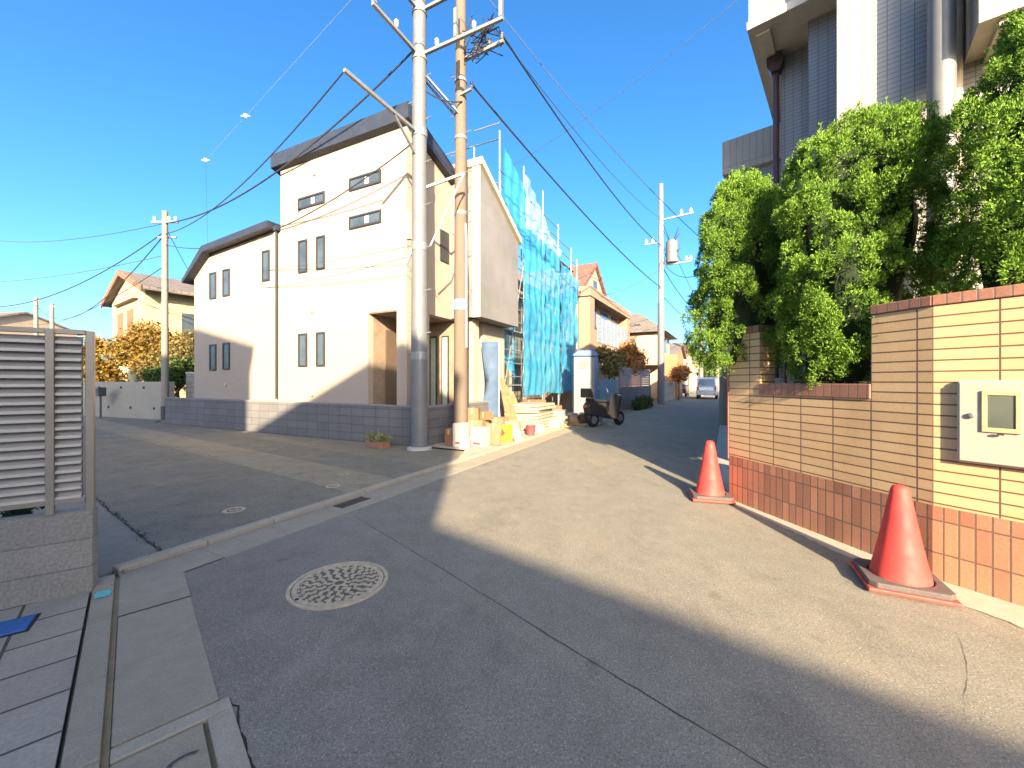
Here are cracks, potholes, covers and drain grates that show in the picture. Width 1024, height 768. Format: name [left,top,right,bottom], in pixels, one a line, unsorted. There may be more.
crack [96,497,162,550]
manhole cover [285,561,388,611]
drain grate [333,496,371,508]
